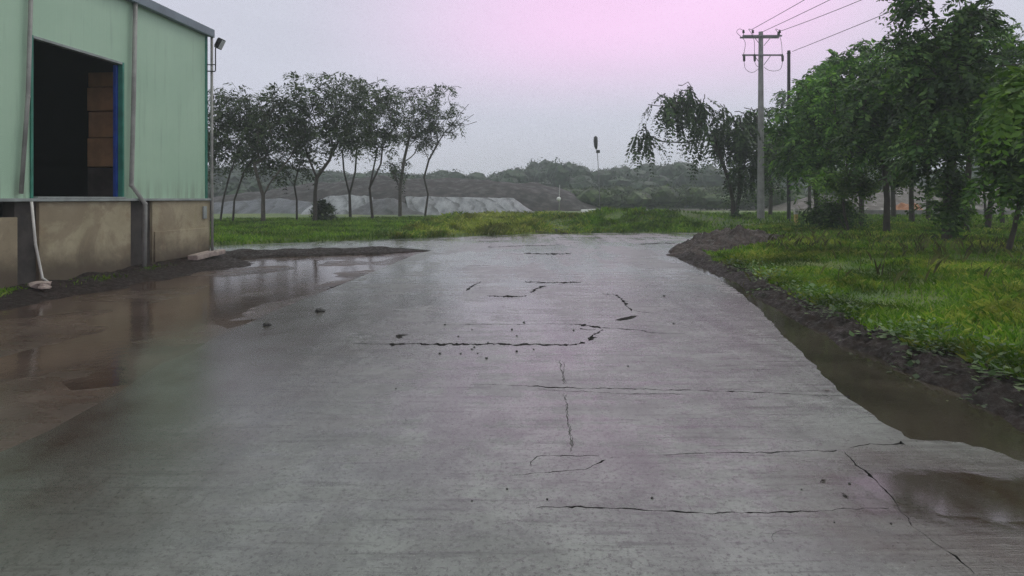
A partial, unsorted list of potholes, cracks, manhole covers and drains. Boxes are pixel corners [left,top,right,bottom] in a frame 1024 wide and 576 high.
crack [537,442,974,573]
crack [354,294,683,346]
crack [473,384,850,398]
crack [466,281,580,298]
crack [488,245,571,255]
crack [512,455,611,476]
